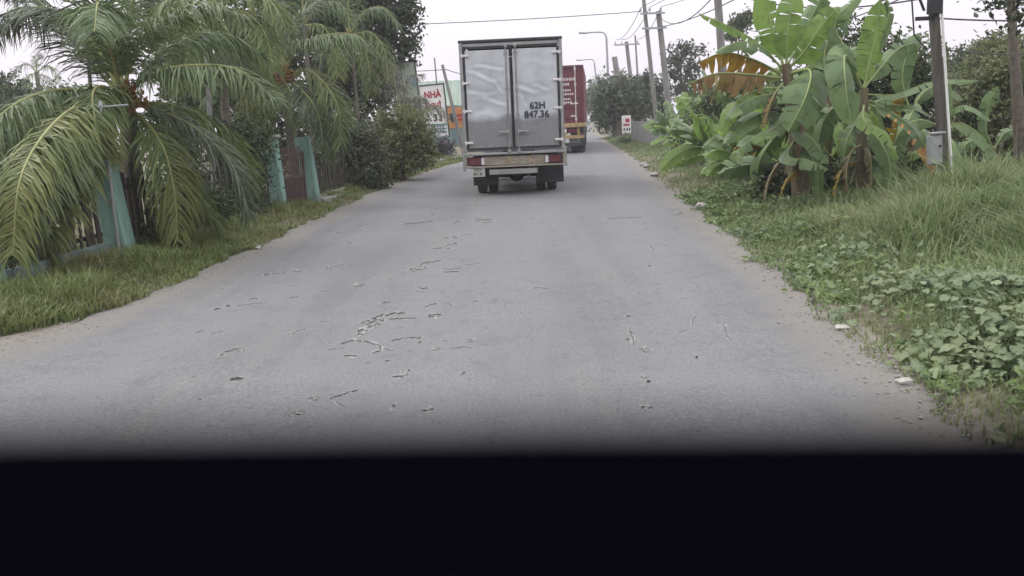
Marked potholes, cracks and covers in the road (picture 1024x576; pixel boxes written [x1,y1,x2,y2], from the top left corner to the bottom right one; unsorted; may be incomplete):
crack [627,326,636,345]
crack [326,213,493,365]
crack [329,390,358,407]
